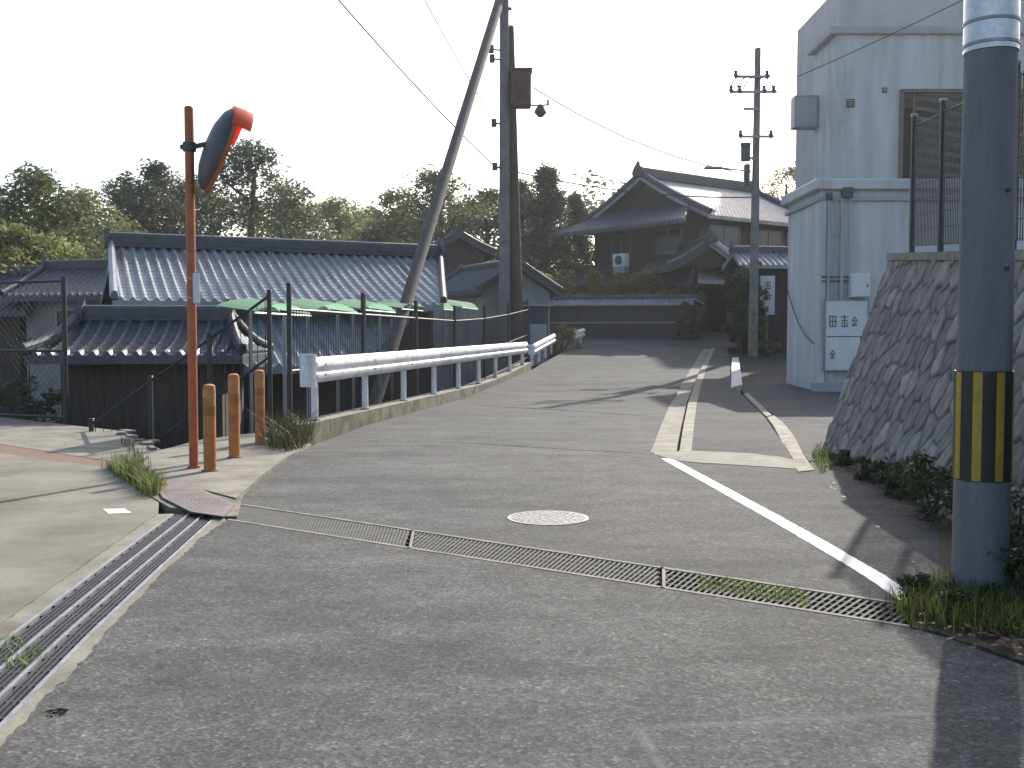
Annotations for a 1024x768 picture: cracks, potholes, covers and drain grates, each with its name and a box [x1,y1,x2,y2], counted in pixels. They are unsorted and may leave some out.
manhole cover [507,510,589,526]
pothole [43,709,68,719]
drain grate [0,603,124,728]
drain grate [49,513,216,606]
